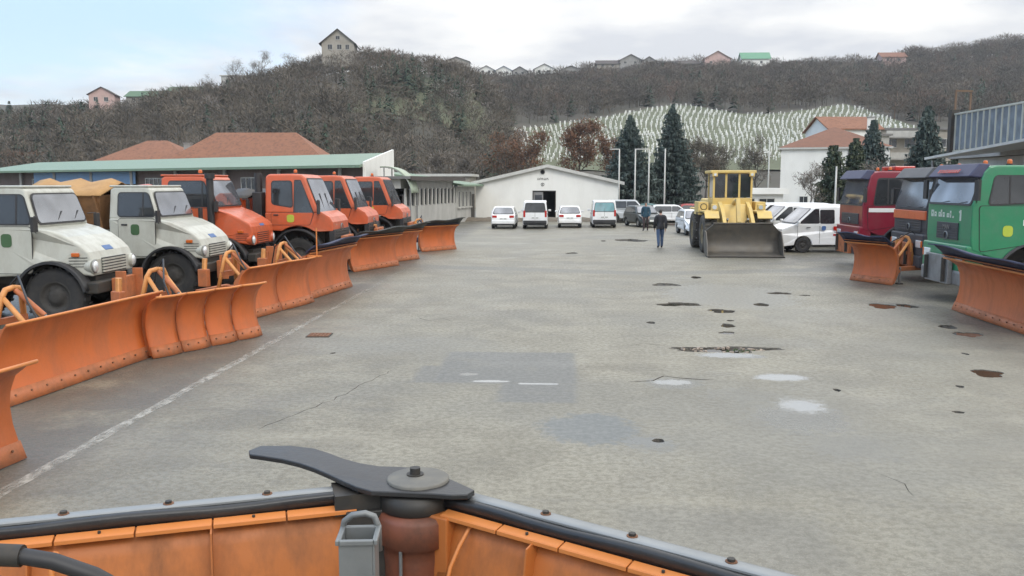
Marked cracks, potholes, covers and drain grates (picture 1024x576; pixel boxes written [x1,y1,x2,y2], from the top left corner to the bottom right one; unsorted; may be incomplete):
pothole [970,369,1004,378]
